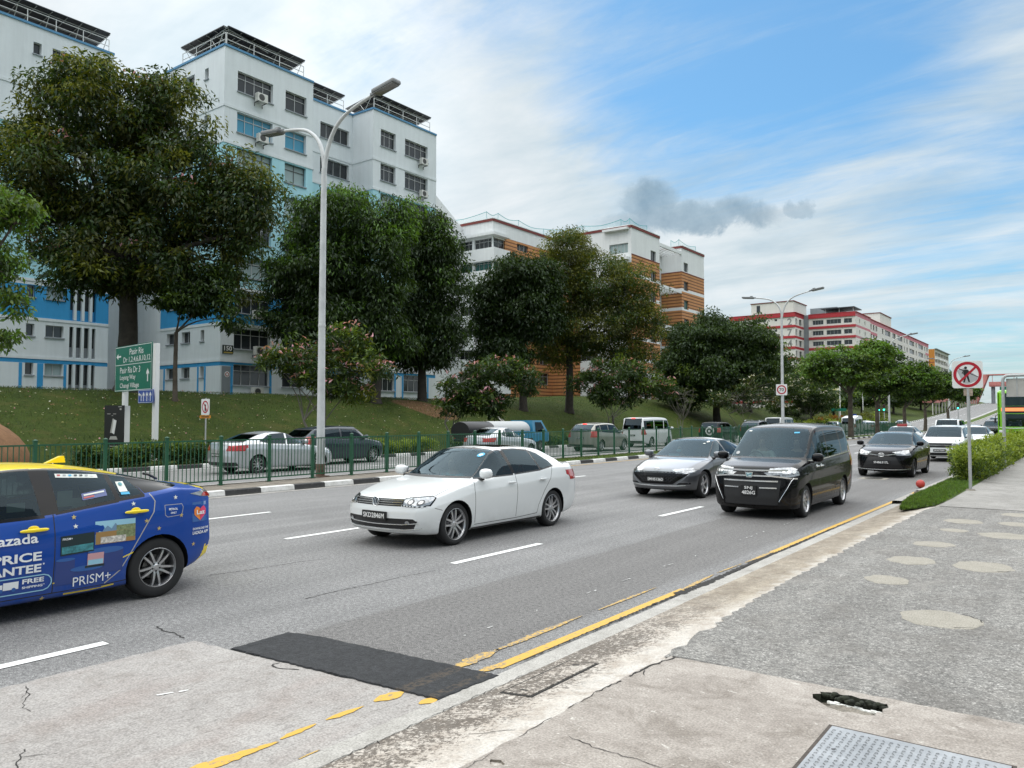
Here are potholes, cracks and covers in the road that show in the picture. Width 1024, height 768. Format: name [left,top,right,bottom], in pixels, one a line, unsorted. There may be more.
pothole [813,692,889,715]
crack [467,656,728,768]
manhole cover [499,661,599,698]
